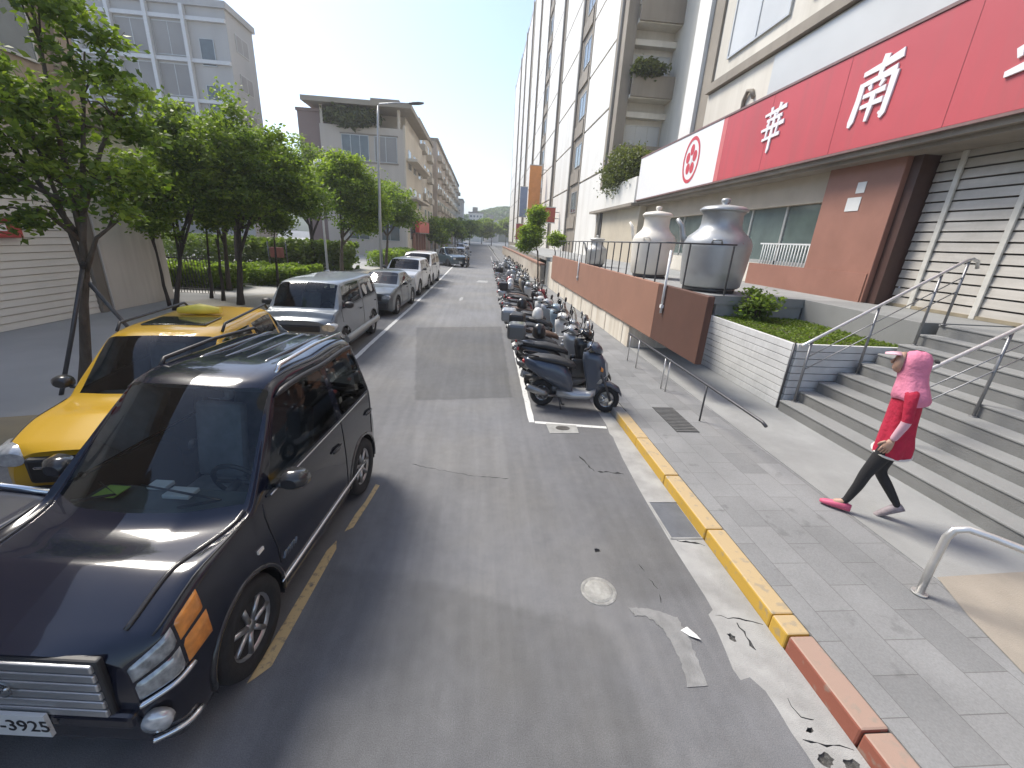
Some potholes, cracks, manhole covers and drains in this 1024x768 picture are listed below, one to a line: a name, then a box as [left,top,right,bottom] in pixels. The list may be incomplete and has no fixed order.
crack [803,739,853,750]
manhole cover [581,577,617,606]
drain grate [652,407,700,433]
crack [718,615,763,650]
utility cover [546,423,579,434]
pothole [817,752,835,768]
